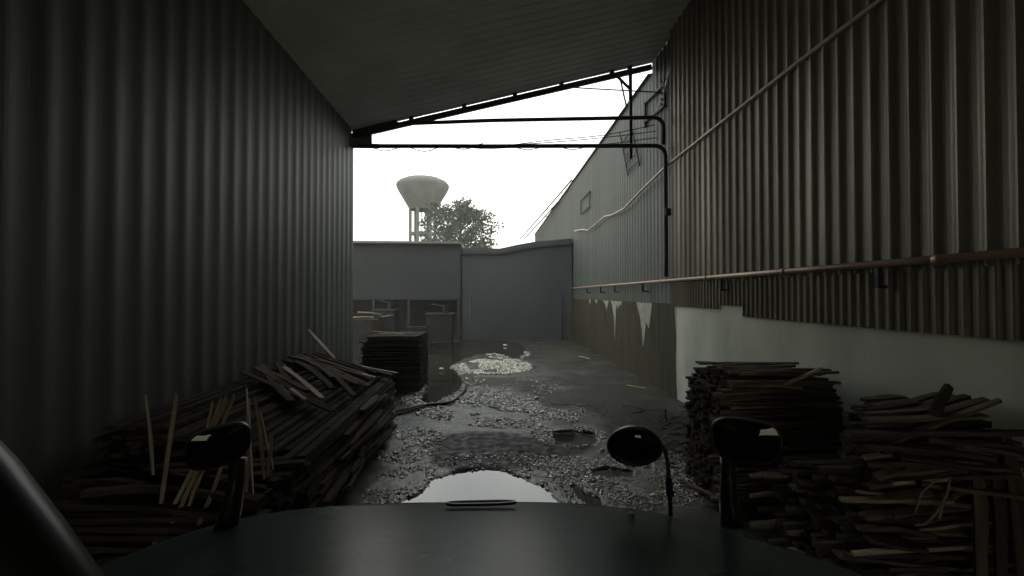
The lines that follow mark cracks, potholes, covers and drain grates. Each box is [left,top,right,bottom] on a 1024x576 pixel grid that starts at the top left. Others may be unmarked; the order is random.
pothole [544,427,606,449]
pothole [583,463,643,482]
pothole [385,461,586,504]
